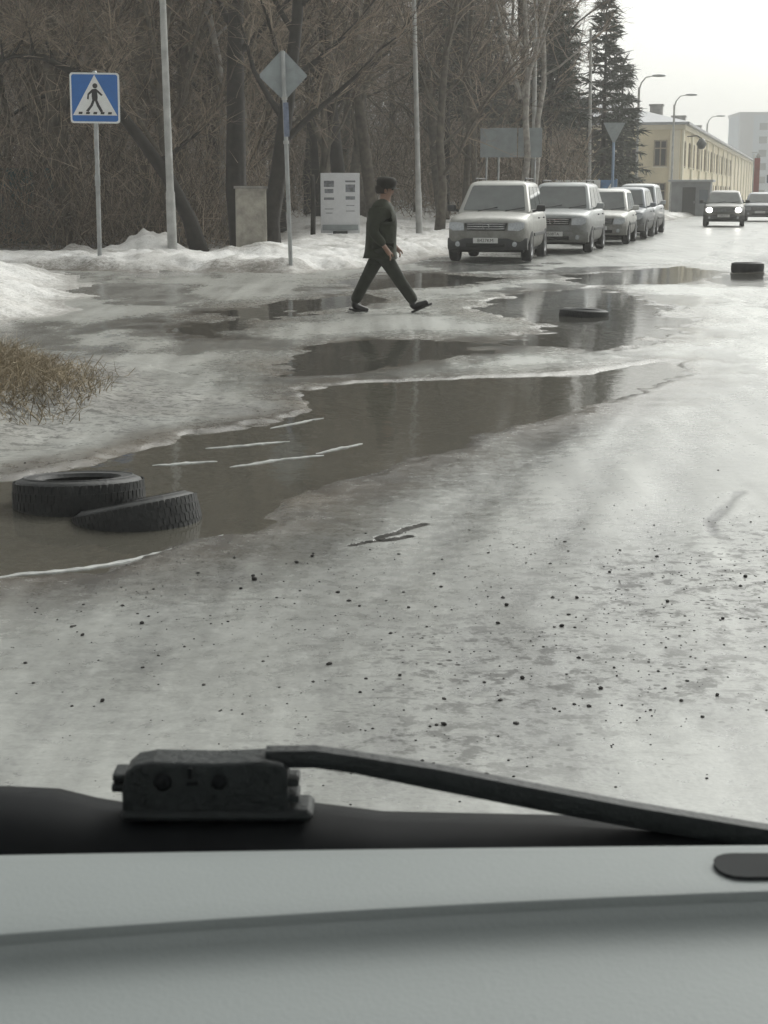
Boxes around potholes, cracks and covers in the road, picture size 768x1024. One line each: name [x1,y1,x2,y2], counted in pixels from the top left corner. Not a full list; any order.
crack [347,523,430,546]
